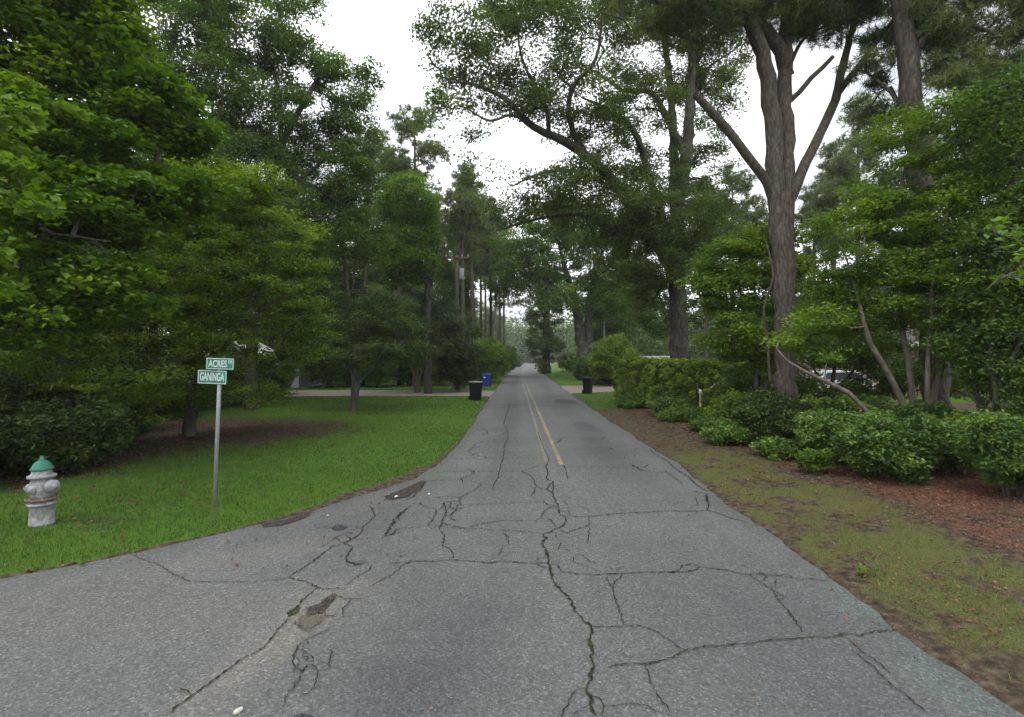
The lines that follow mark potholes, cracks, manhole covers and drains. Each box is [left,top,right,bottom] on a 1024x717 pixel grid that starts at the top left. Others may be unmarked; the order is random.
crack [134,403,928,717]
pothole [386,480,426,500]
pothole [307,593,337,617]
